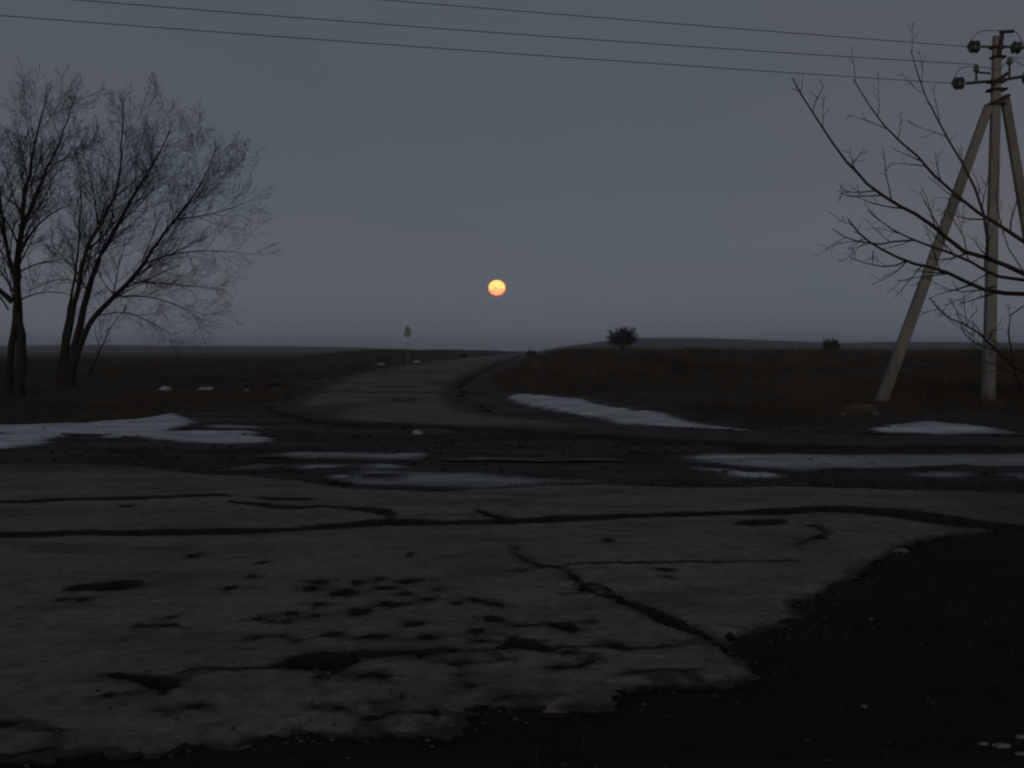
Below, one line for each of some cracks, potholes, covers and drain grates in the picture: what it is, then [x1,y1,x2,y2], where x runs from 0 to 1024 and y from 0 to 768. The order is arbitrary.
crack [0,494,1024,661]
pothole [106,672,183,696]
pothole [496,636,555,653]
pothole [63,580,143,591]
